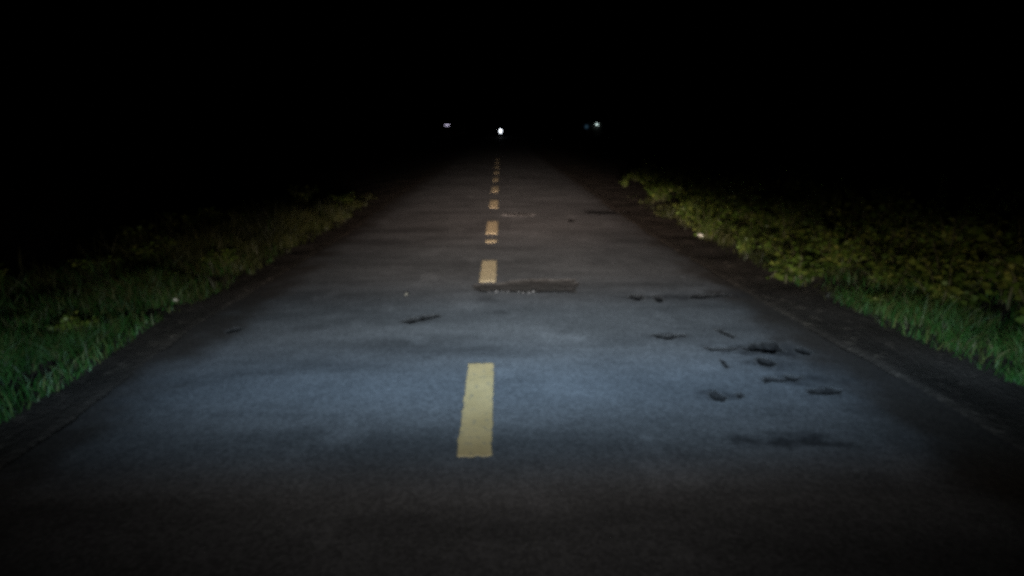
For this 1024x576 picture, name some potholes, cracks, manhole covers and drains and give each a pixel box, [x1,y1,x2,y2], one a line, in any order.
pothole [752,356,779,368]
pothole [757,374,806,384]
pothole [398,314,442,324]
pothole [792,347,815,356]
pothole [471,278,580,293]
pothole [805,386,845,396]
pothole [739,341,789,355]
pothole [650,333,688,341]
pothole [706,390,730,403]
